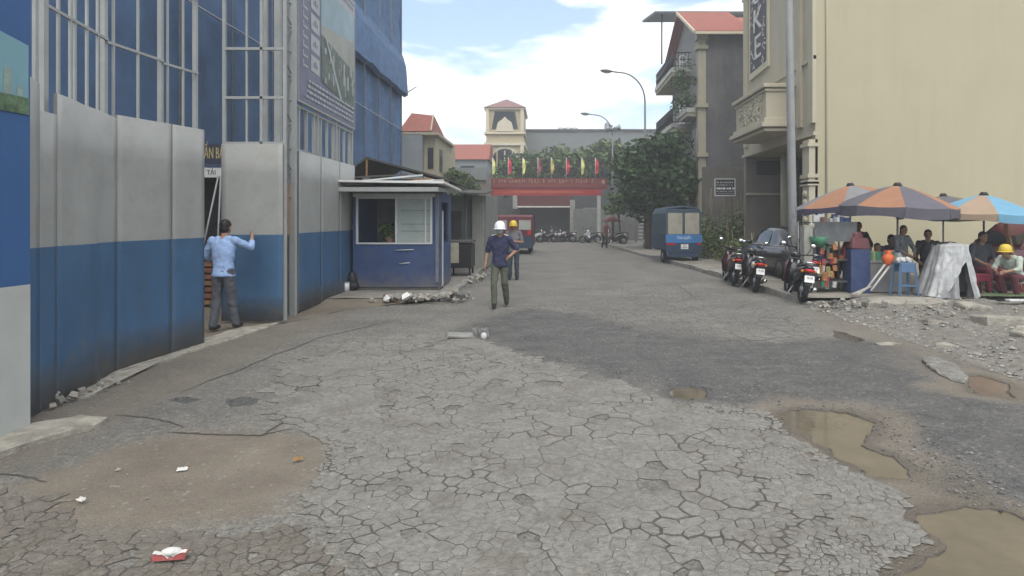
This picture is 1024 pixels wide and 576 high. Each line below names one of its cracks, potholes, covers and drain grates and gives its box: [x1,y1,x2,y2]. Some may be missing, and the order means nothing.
pothole [776,408,911,479]
pothole [833,330,865,343]
crack [0,333,935,576]
pothole [967,375,1015,398]
pothole [893,506,1024,576]
pothole [668,387,708,401]
